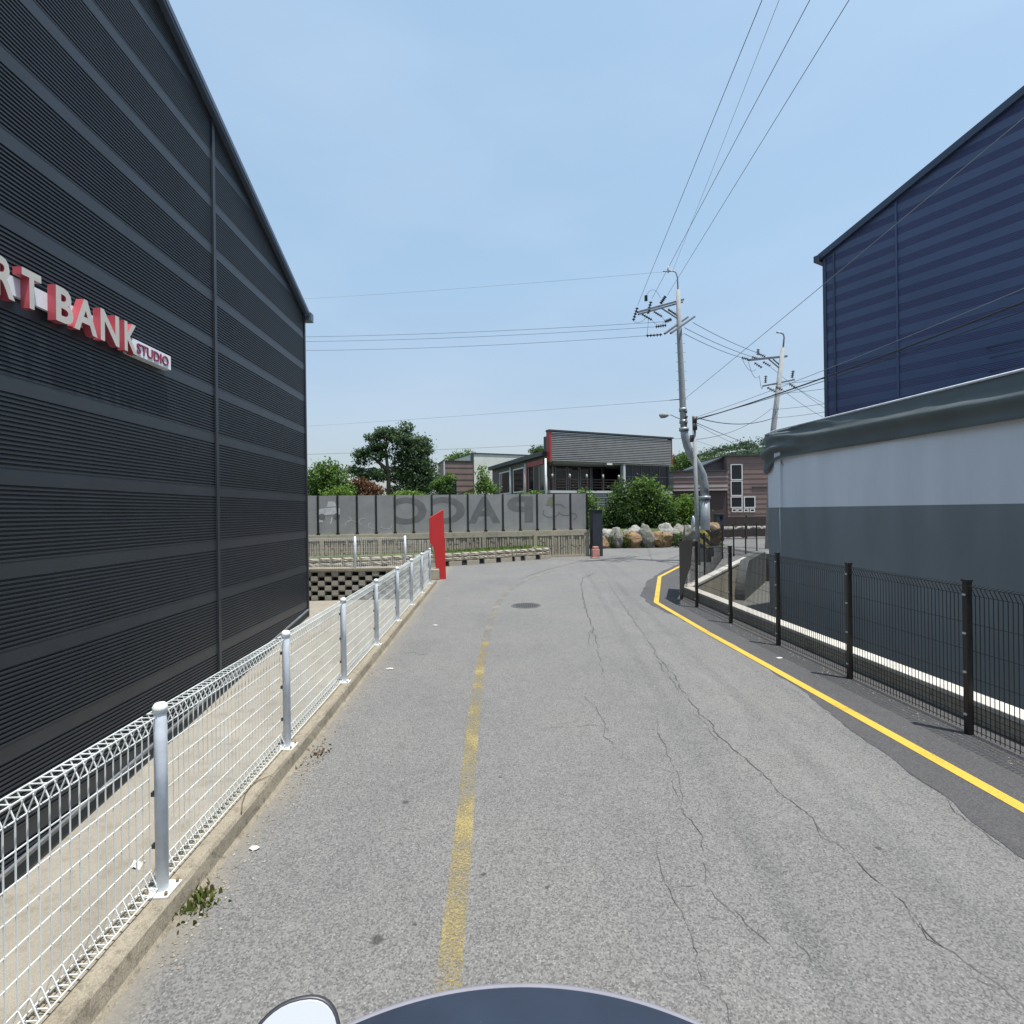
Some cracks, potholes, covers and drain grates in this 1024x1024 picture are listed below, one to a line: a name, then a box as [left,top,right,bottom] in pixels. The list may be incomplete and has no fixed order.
crack [580,573,606,679]
crack [606,579,1024,1006]
